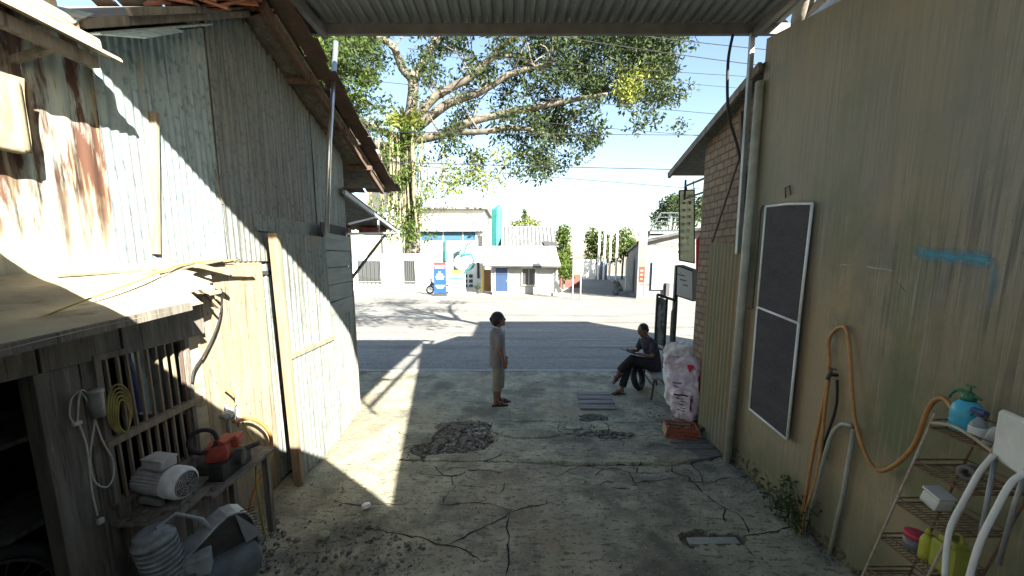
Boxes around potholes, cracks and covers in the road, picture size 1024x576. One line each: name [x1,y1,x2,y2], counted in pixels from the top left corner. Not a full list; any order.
pothole [572,429,635,440]
crack [361,421,792,576]
pothole [580,414,608,422]
pothole [411,421,494,461]
